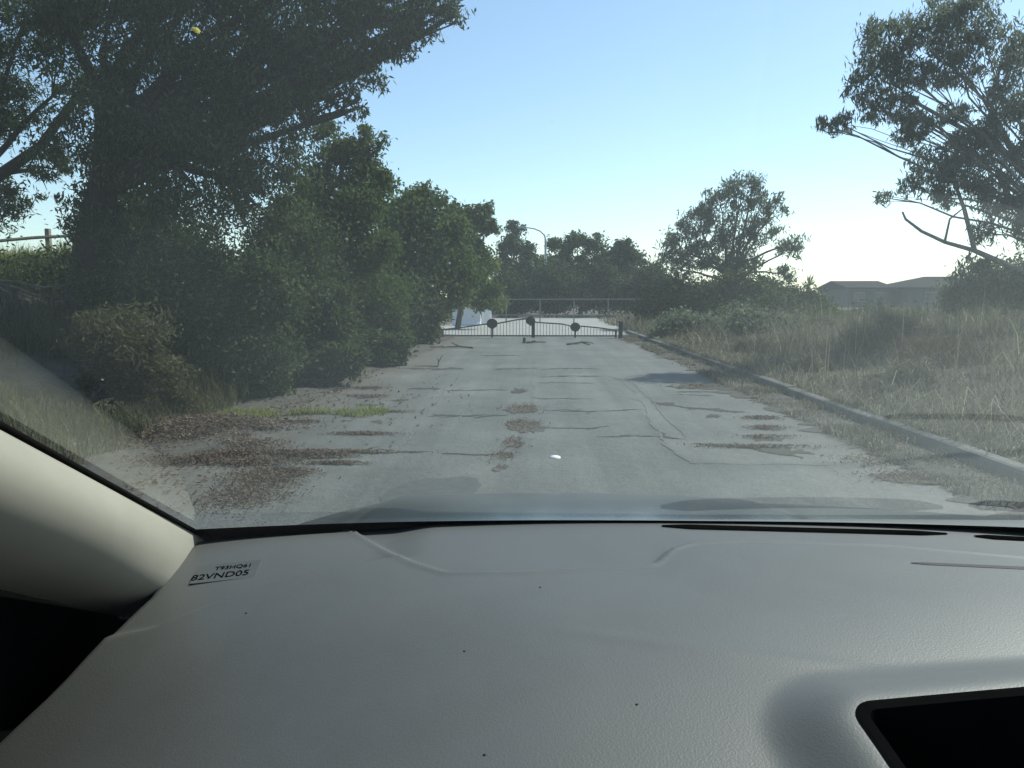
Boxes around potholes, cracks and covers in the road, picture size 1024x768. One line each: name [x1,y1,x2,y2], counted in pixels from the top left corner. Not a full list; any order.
pothole [502,404,538,414]
pothole [505,418,546,433]
crack [482,340,829,466]
